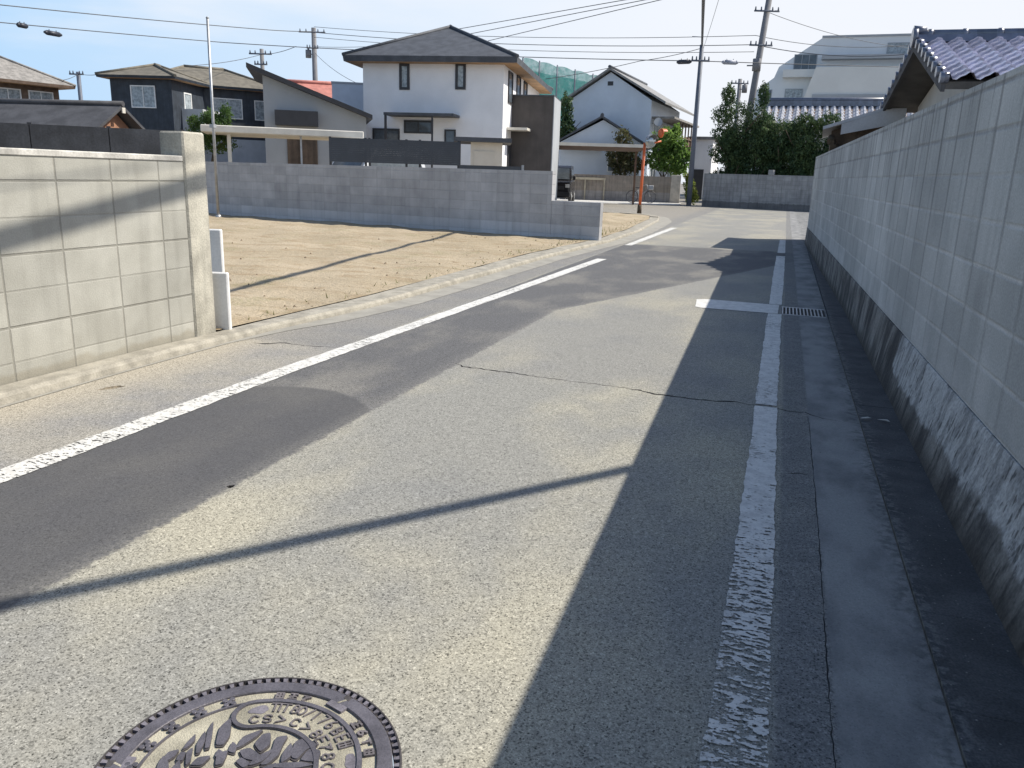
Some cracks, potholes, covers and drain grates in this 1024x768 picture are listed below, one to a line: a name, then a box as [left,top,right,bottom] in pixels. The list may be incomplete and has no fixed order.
manhole cover [94,677,402,768]
crack [453,362,841,768]
drain grate [781,306,826,318]
